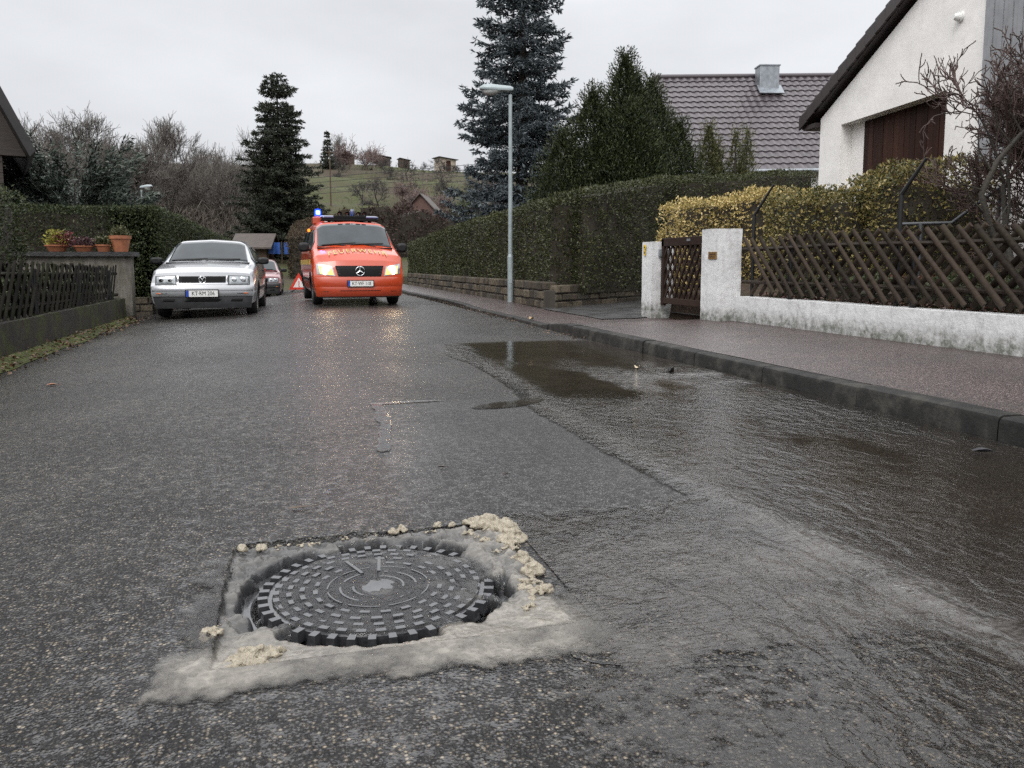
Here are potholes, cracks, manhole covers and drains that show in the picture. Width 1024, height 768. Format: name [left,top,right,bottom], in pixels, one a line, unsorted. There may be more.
manhole cover [240,545,510,664]
